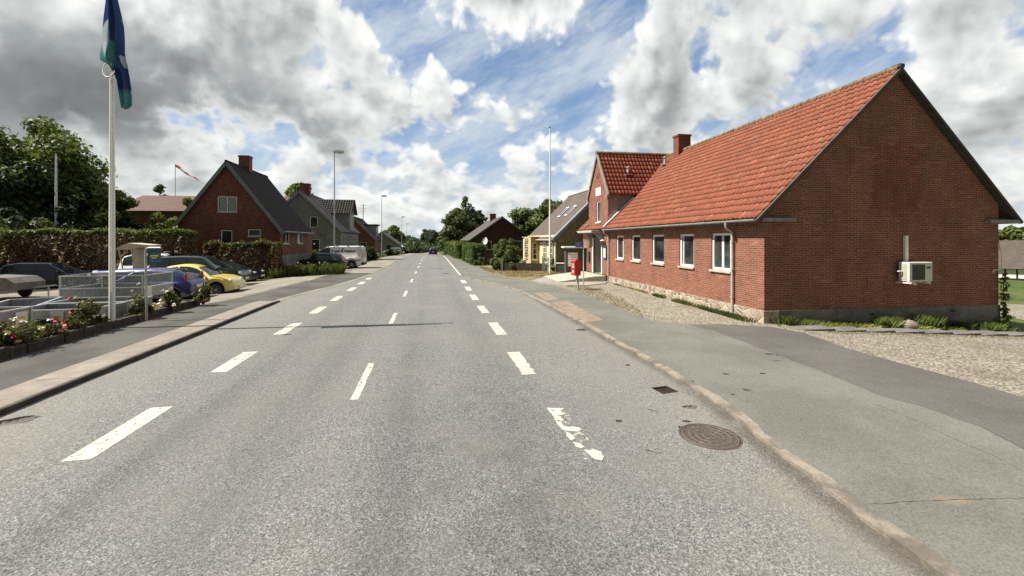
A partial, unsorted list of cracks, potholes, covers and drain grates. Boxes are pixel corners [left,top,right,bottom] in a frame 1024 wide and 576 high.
manhole cover [678,423,743,450]
drain grate [652,386,678,394]
